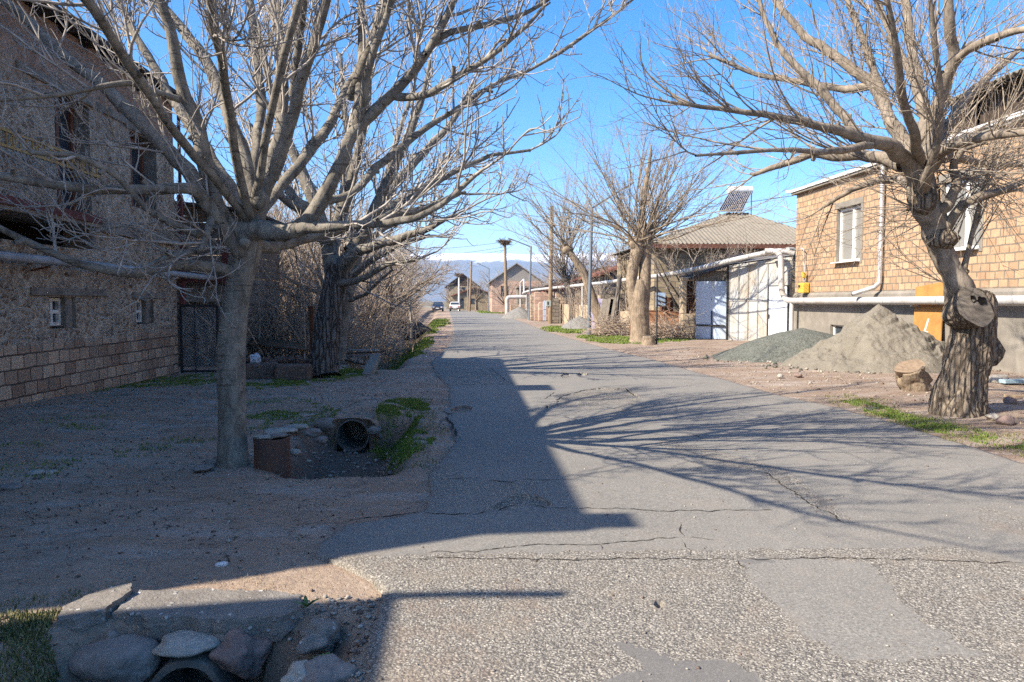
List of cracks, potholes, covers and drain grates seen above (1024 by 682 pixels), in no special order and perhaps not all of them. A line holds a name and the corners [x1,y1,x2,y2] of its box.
crack [696,435,844,523]
crack [432,525,706,555]
